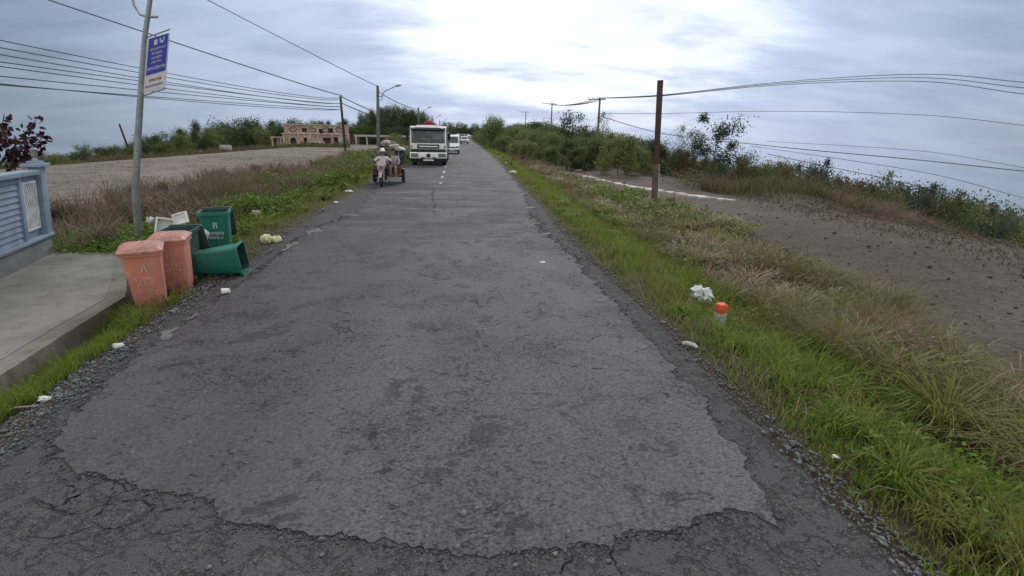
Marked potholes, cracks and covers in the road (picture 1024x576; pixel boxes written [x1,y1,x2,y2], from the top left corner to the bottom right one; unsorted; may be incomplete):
crack [33,462,203,523]
crack [205,500,757,576]
